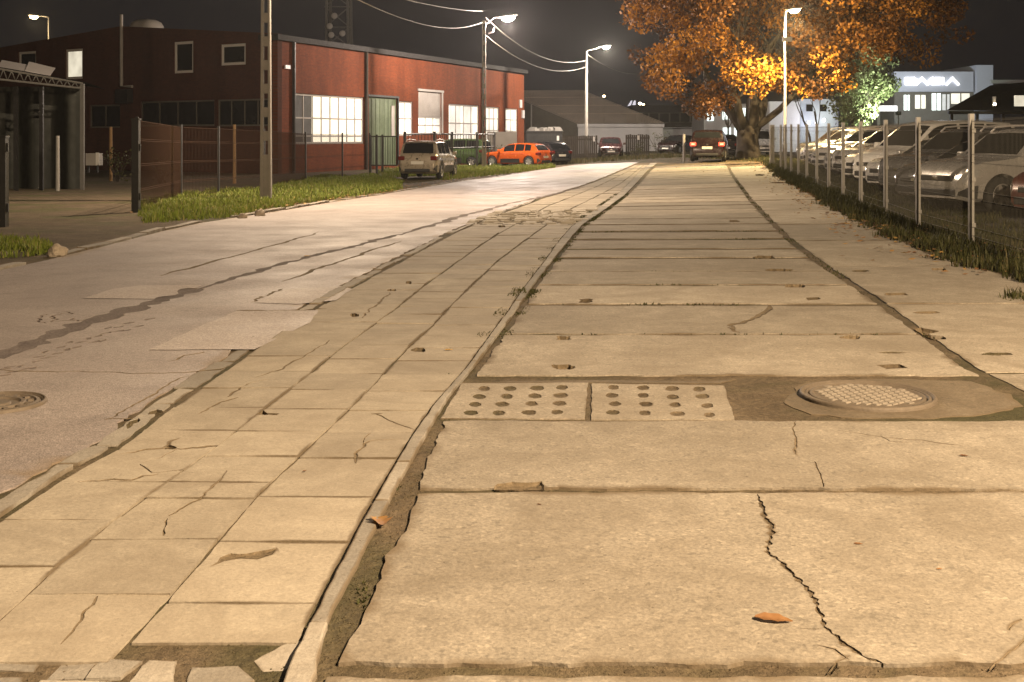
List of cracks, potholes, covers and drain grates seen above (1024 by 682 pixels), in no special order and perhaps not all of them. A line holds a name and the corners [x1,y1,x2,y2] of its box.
crack [201,341,329,413]
manhole cover [0,391,48,414]
crack [161,232,401,318]
crack [82,439,227,536]
crack [728,305,773,333]
manhole cover [799,380,938,412]
crack [792,422,824,487]
crack [757,495,883,674]
crack [60,596,98,645]
